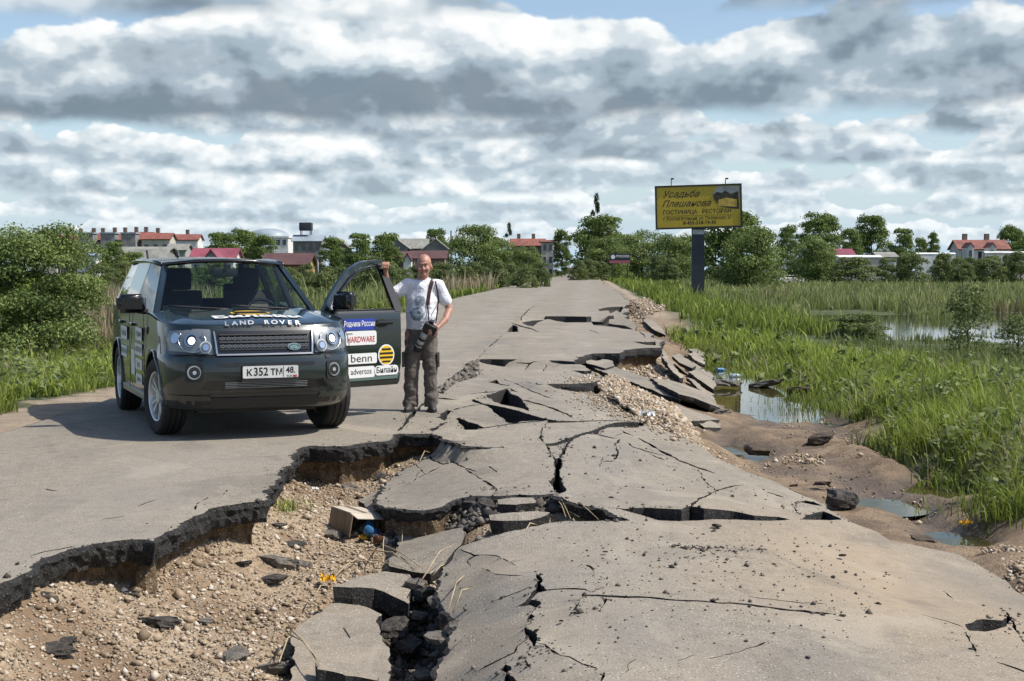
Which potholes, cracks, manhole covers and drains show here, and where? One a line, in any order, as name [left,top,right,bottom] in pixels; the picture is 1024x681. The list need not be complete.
pothole [472,389,557,424]
crack [398,306,842,521]
crack [461,549,830,681]
pothole [457,418,539,430]
pothole [965,612,1024,651]
